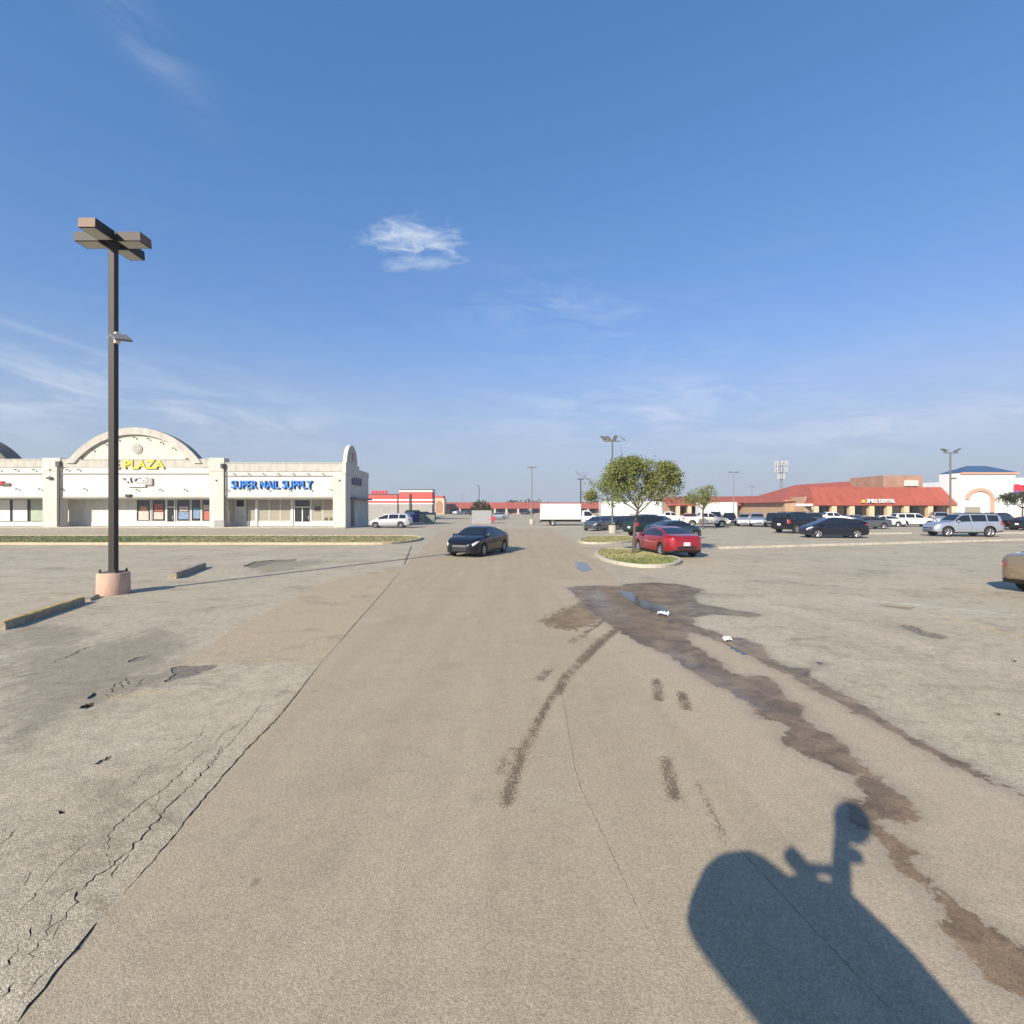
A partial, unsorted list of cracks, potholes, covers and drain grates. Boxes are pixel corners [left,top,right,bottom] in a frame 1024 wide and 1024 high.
crack [2,703,262,997]
